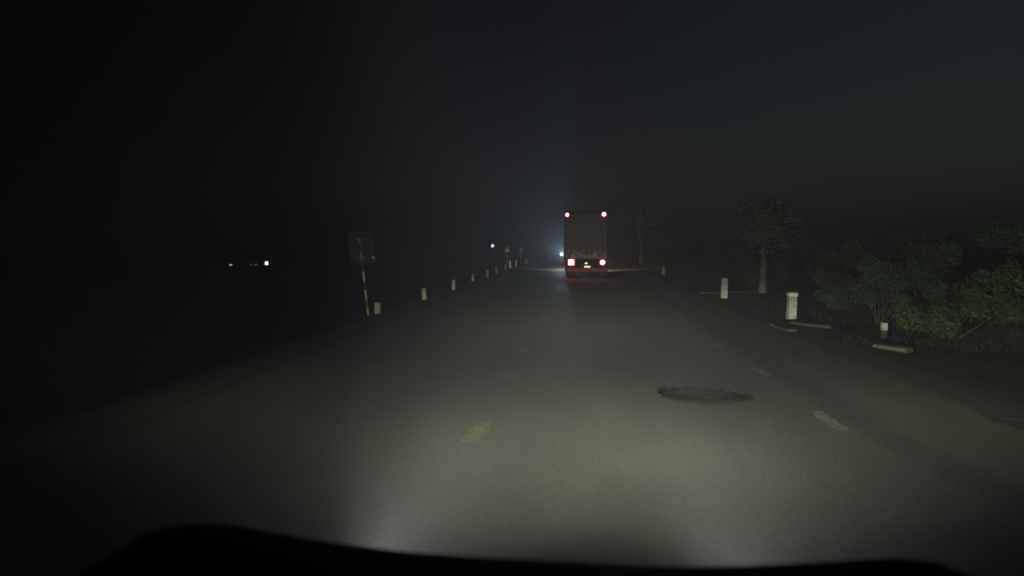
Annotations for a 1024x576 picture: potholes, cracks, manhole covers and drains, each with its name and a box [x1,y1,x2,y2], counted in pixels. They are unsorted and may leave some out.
pothole [657,386,756,406]
